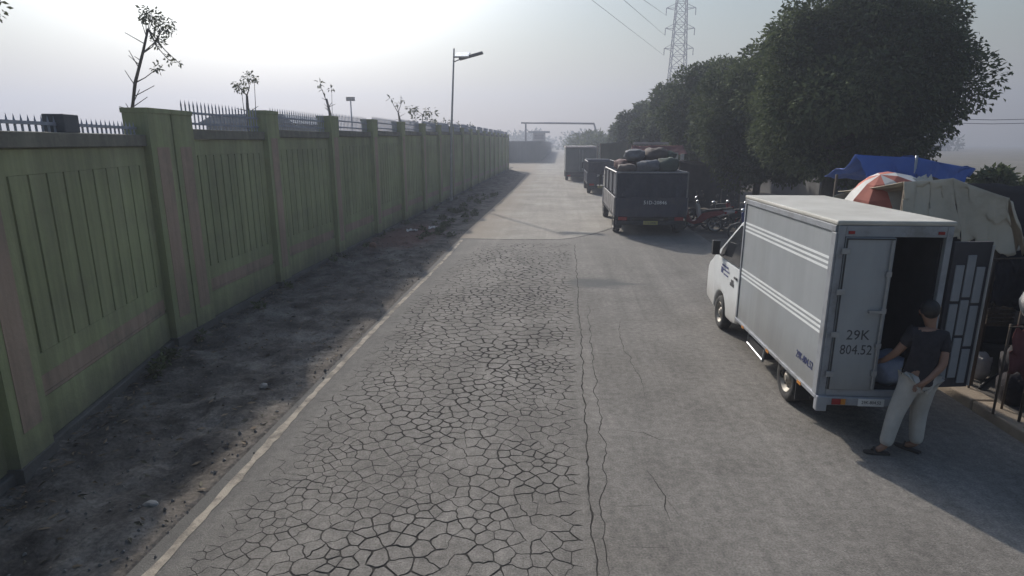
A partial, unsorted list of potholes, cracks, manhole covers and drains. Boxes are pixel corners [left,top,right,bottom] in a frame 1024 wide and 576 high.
crack [184,243,684,576]
